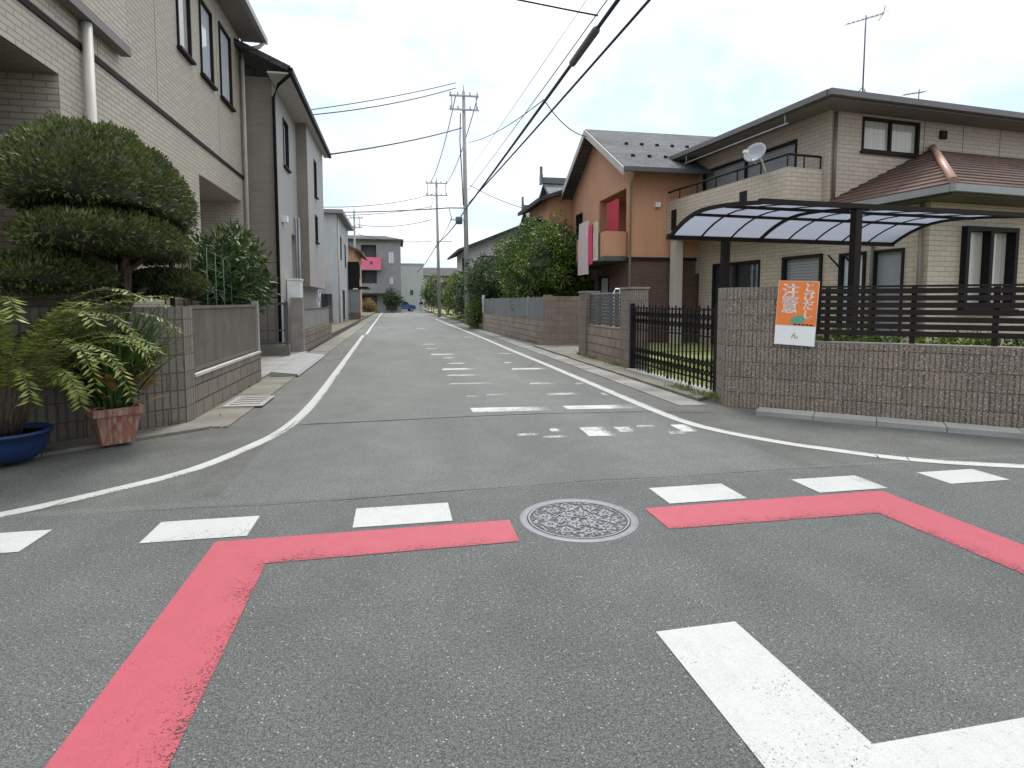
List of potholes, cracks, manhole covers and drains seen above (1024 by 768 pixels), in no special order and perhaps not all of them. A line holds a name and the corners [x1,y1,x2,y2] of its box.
manhole cover [519,499,639,543]
